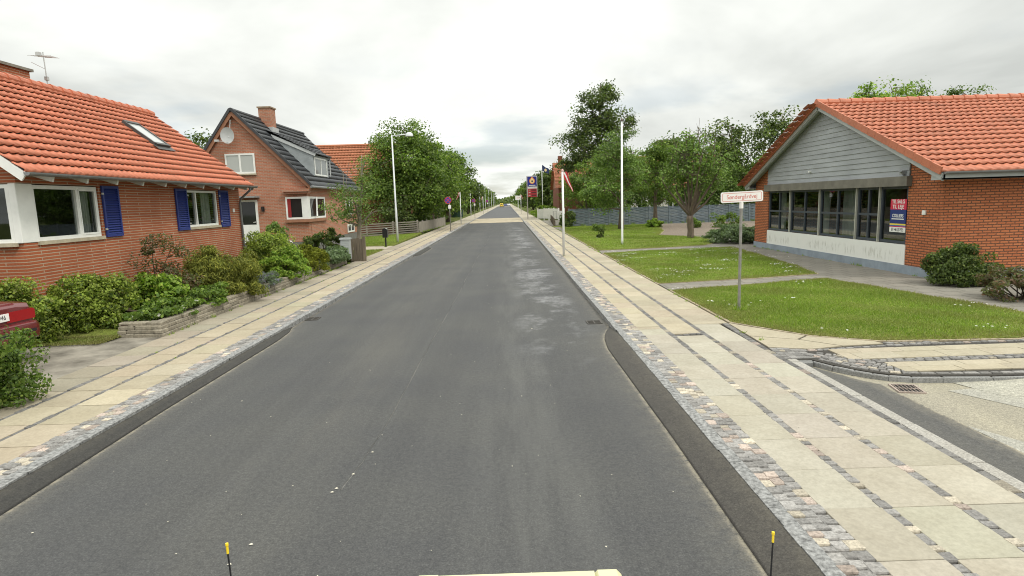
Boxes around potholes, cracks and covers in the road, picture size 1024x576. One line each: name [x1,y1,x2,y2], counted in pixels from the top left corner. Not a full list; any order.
drain grate [888,384,927,394]
